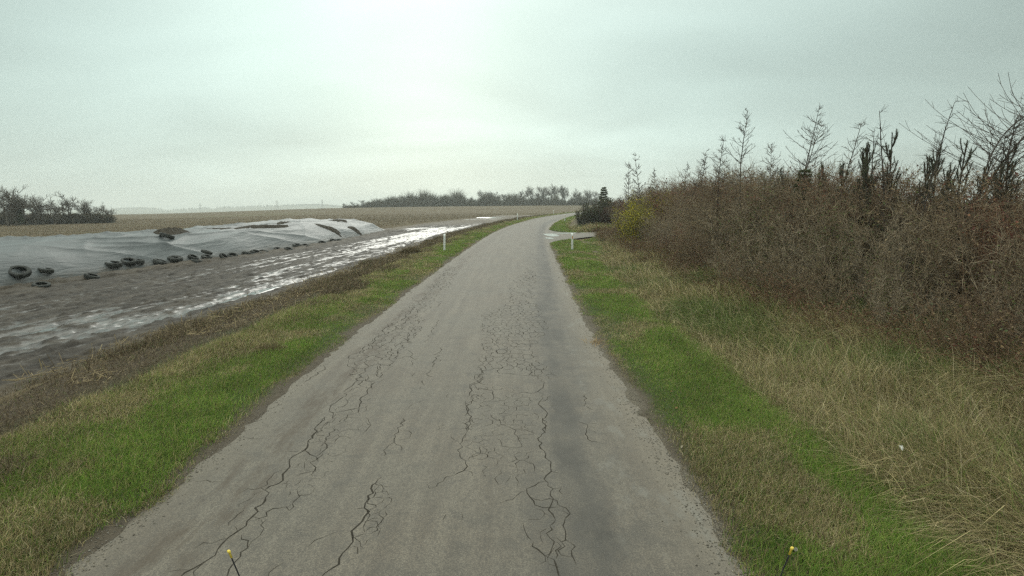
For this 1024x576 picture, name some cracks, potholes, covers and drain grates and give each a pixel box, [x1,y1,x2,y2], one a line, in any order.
crack [427,266,576,576]
crack [169,267,455,576]
